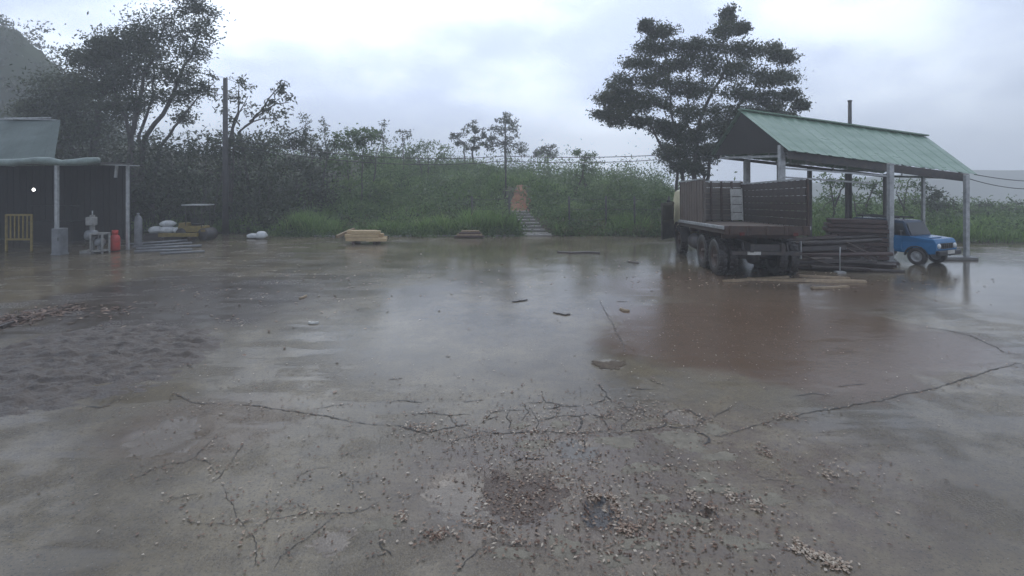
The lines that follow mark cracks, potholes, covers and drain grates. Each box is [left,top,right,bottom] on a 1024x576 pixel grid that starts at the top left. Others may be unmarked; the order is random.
crack [392,385,770,463]
crack [776,327,1015,421]
crack [128,438,384,569]
crack [236,404,377,425]
pothole [581,496,623,531]
pothole [482,470,571,526]
